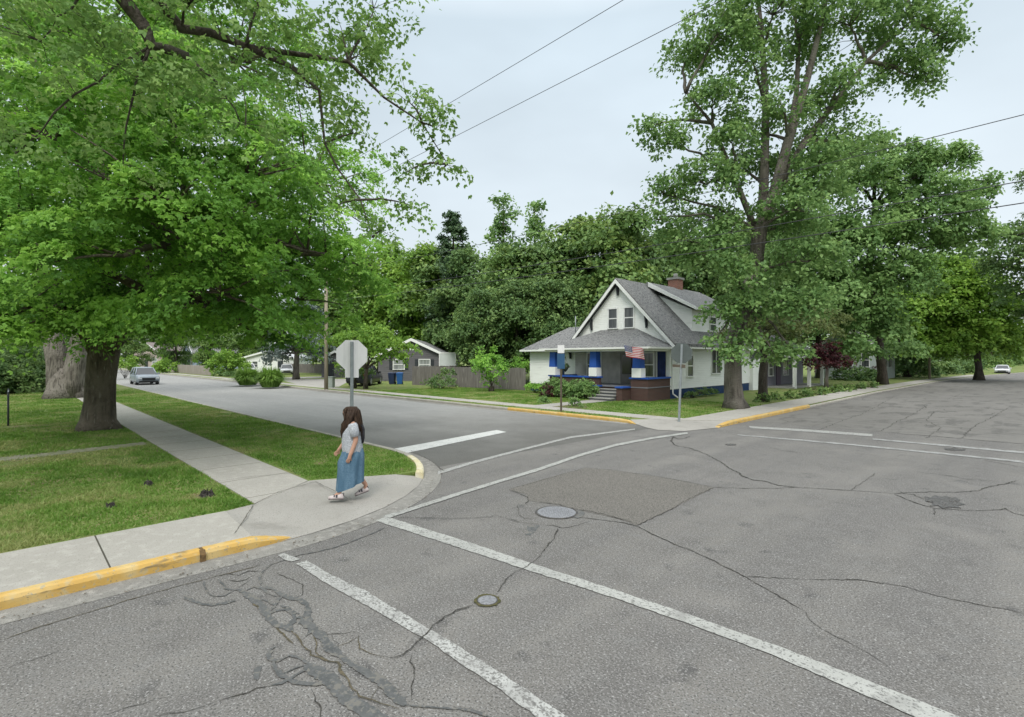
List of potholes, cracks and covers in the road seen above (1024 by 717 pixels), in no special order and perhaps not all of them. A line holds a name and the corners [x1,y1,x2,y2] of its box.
crack [220,571,303,595]
manhole cover [535,506,578,519]
crack [670,436,1021,515]
crack [109,686,268,716]
crack [416,491,1020,661]
crack [252,603,474,717]
utility cover [474,594,501,607]
